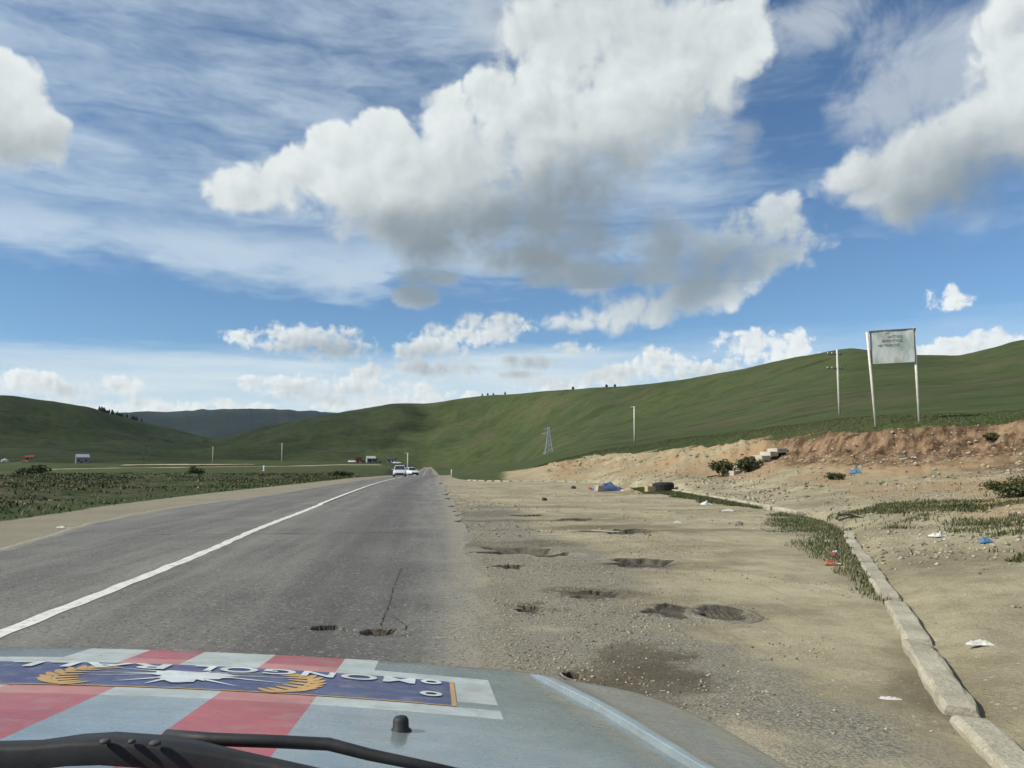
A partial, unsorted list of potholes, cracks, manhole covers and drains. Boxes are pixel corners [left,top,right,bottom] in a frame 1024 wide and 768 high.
pothole [634,601,705,624]
pothole [350,628,413,638]
pothole [684,604,765,624]
crack [369,569,408,636]
pothole [509,604,552,616]
pothole [593,557,714,570]
pothole [559,670,586,681]
pothole [544,589,650,601]
pothole [460,546,603,559]
pothole [564,528,690,536]
